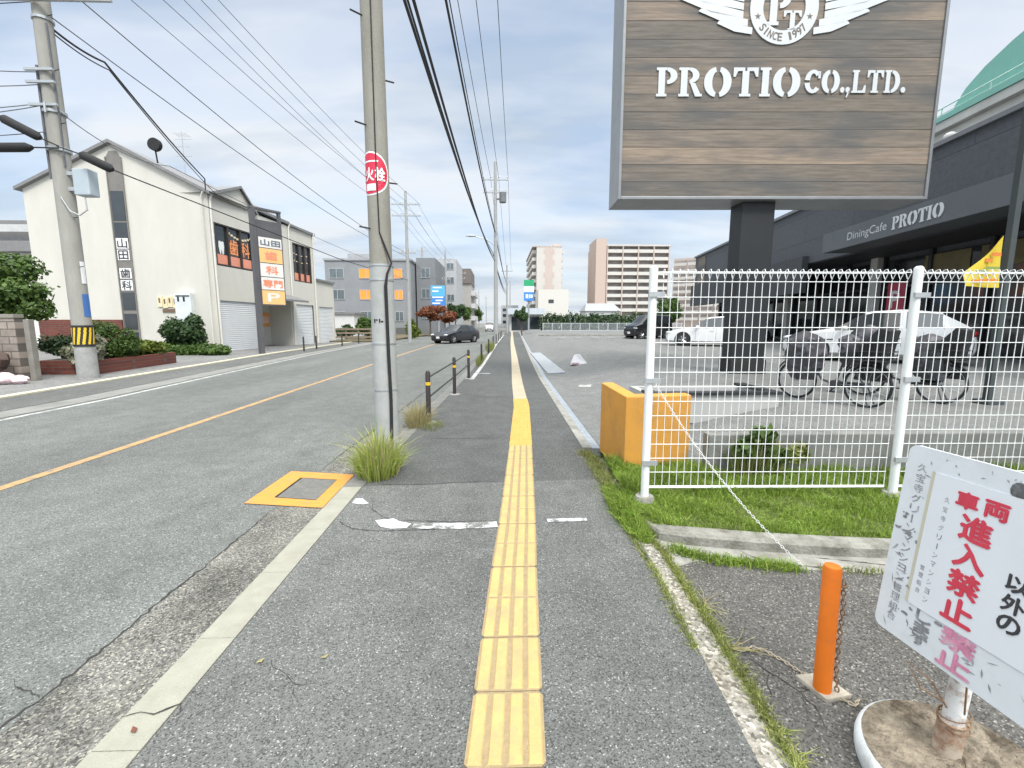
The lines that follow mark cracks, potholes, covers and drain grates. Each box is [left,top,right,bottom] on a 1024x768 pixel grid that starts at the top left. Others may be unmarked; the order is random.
crack [748,657,826,728]
manhole cover [275,478,337,500]
crack [0,508,274,728]
crack [340,503,487,531]
